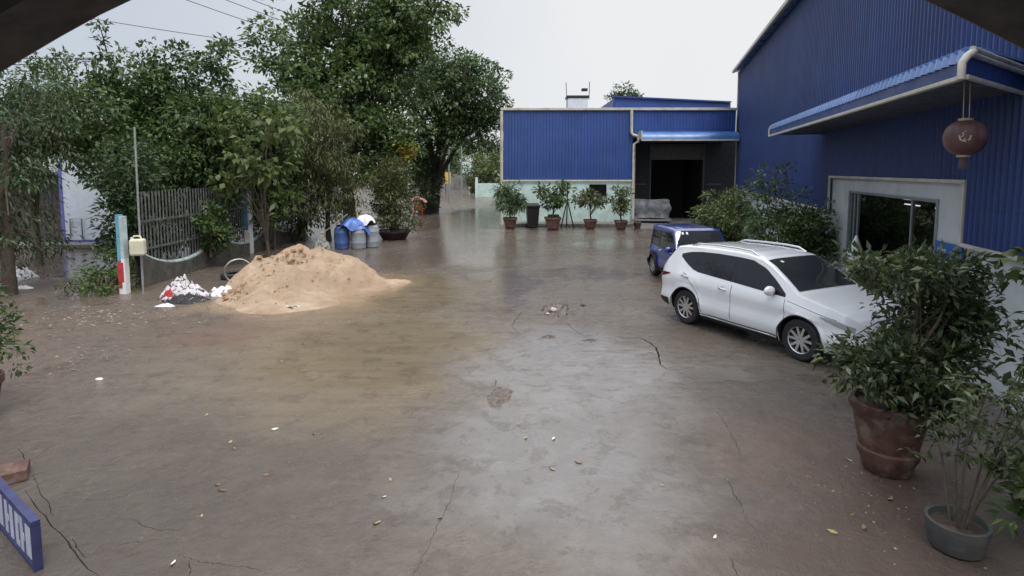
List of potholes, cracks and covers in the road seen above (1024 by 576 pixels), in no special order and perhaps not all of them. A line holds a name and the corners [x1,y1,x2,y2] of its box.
crack [719,414,746,574]
pothole [487,386,514,409]
crack [115,520,268,574]
crack [17,448,86,558]
pothole [541,302,569,317]
